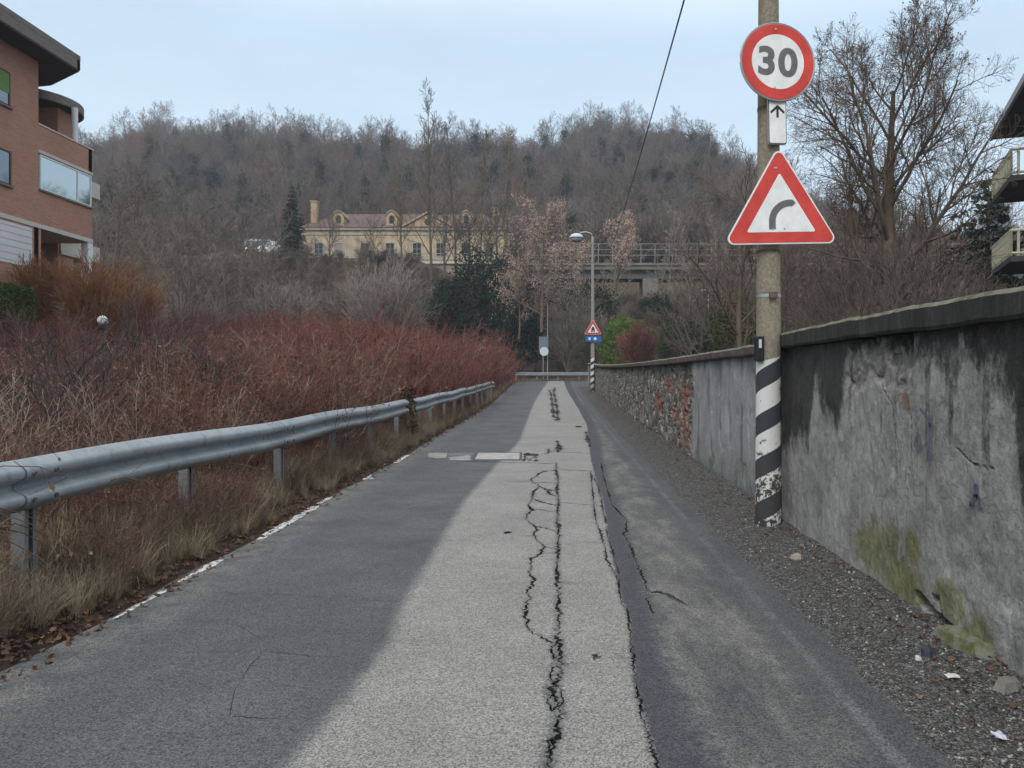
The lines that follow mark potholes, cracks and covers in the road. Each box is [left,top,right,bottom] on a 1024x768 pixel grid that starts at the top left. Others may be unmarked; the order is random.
crack [549,387,560,421]
crack [176,622,335,730]
crack [522,432,654,768]
